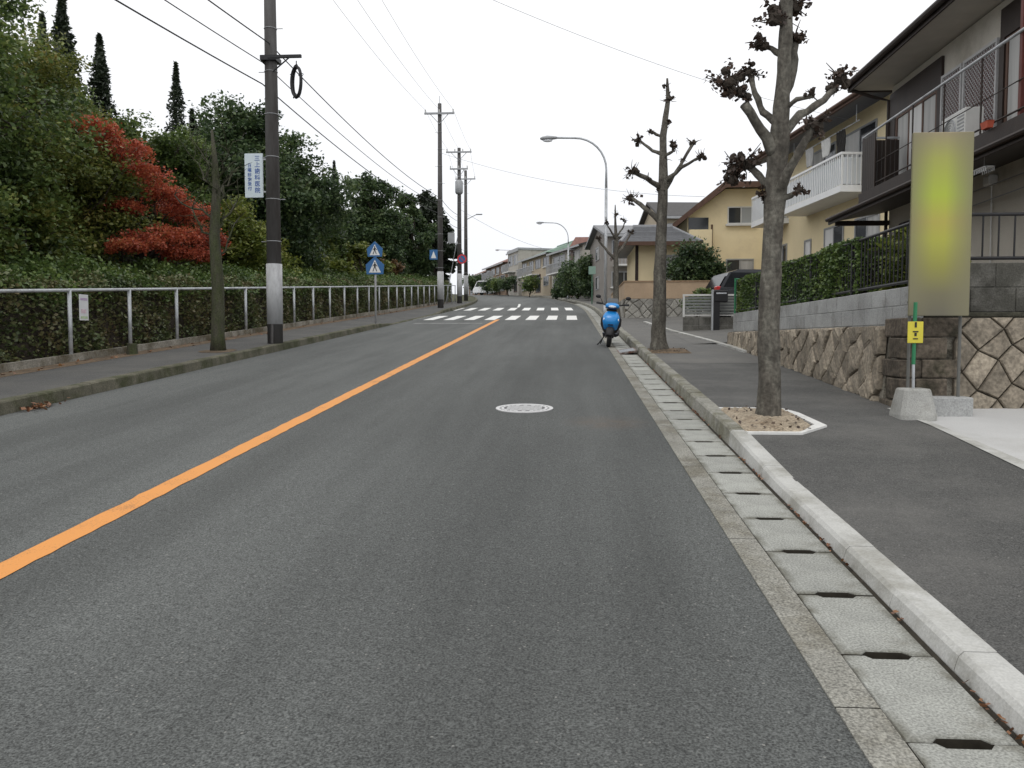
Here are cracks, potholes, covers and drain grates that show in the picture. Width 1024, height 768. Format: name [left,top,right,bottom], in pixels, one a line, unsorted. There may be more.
manhole cover [496,404,553,413]
